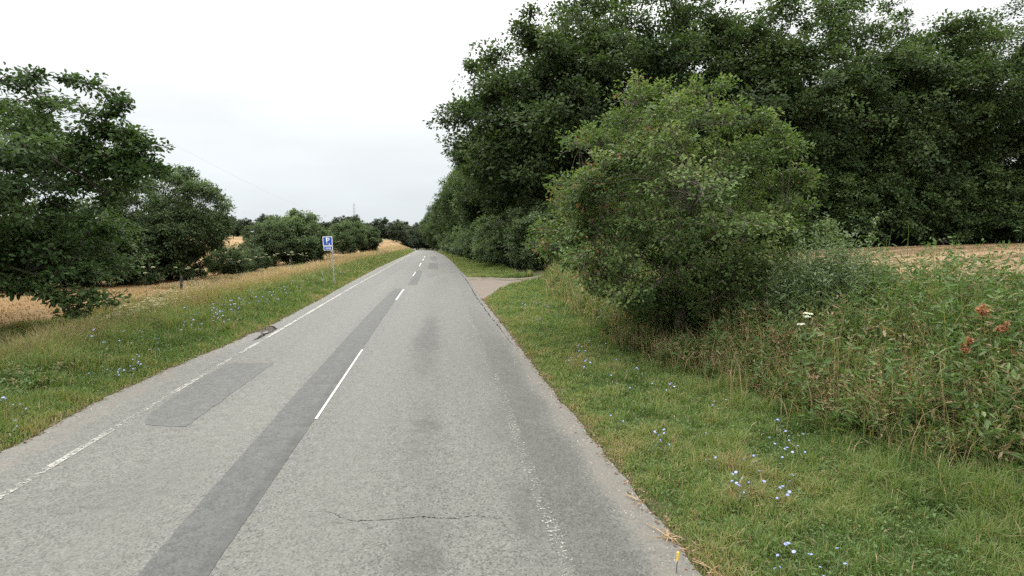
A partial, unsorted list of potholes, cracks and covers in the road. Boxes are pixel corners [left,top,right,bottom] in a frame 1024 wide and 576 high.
crack [330,512,499,523]
